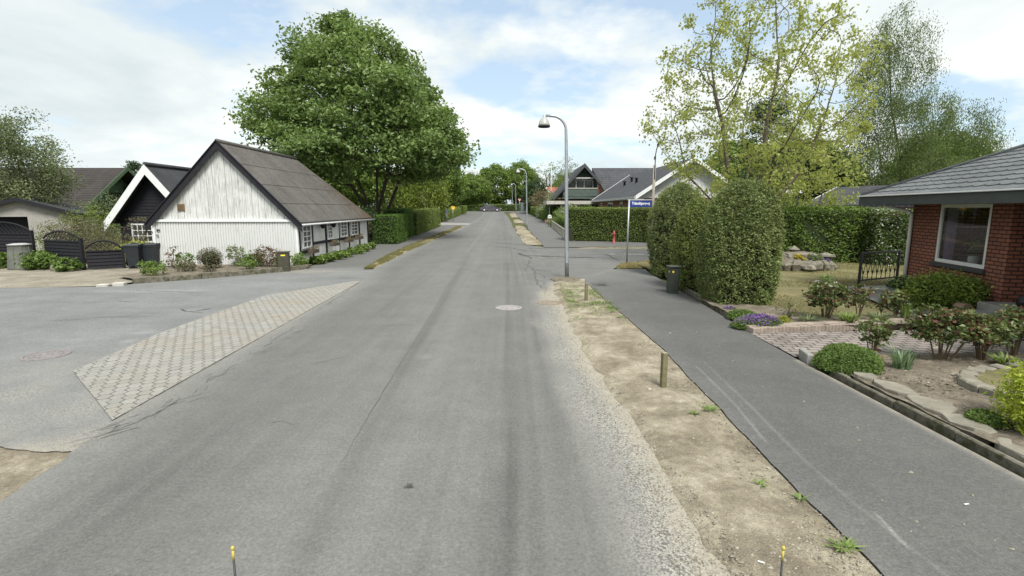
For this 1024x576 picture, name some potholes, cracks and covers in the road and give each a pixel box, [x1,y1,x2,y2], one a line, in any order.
crack [63,283,357,446]
crack [519,253,559,293]
manhole cover [19,349,72,361]
